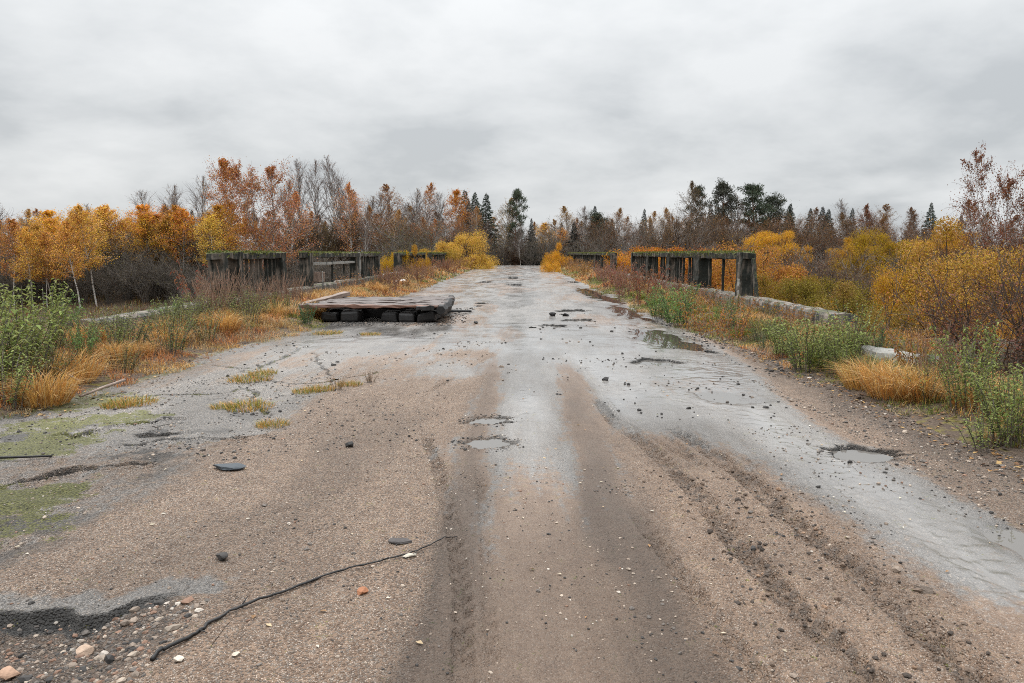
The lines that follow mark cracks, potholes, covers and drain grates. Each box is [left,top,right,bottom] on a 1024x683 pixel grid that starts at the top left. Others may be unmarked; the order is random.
pothole [811,442,920,466]
pothole [452,415,523,426]
pothole [617,356,697,368]
pothole [454,434,526,451]
